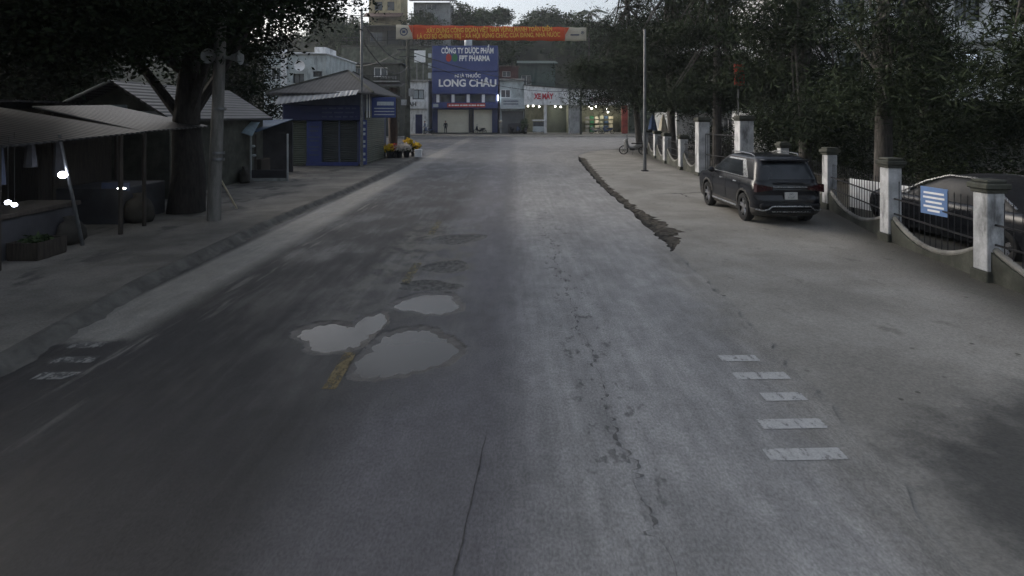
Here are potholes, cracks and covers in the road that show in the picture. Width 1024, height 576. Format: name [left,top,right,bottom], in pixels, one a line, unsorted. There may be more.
crack [543,227,677,575]
pothole [419,260,469,274]
pothole [289,320,380,355]
pothole [398,280,464,291]
pothole [386,291,466,316]
pothole [352,310,390,335]
pothole [579,157,683,251]
crack [452,433,487,576]
pothole [345,324,466,382]
pothole [432,234,487,245]
